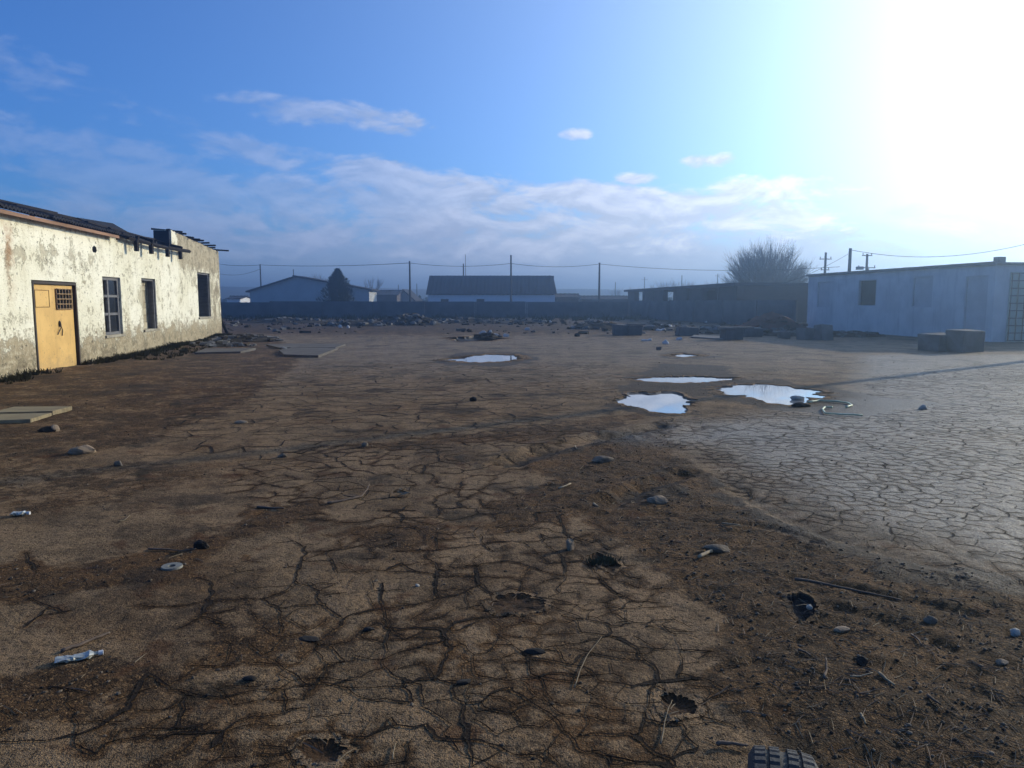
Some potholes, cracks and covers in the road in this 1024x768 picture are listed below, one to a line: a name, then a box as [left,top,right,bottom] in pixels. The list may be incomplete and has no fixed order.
pothole [703,383,839,406]
crack [0,362,778,768]
pothole [652,688,707,721]
pothole [606,390,705,415]
pothole [622,375,746,384]
pothole [481,590,553,617]
pothole [432,353,533,363]
pothole [582,550,626,575]
